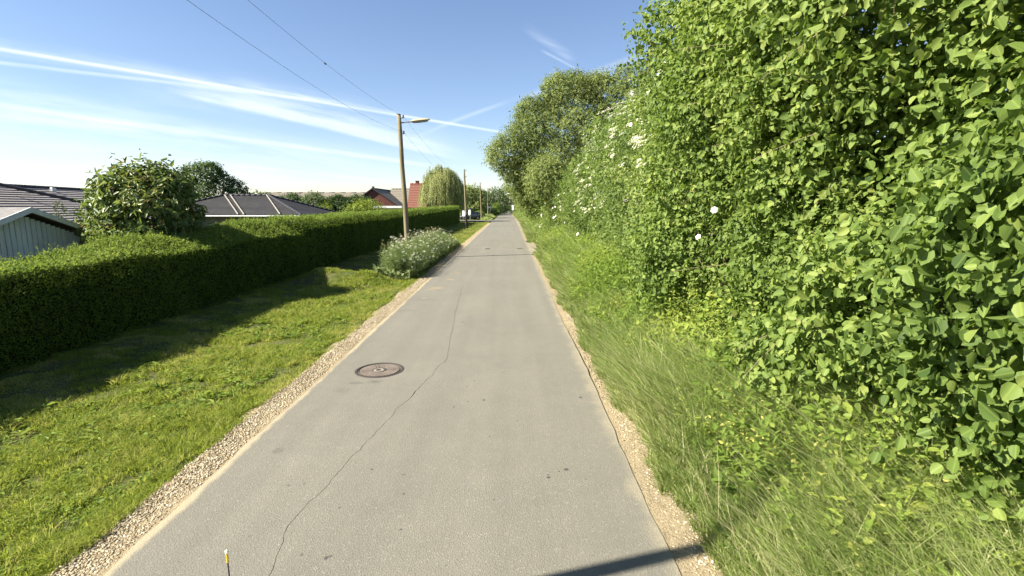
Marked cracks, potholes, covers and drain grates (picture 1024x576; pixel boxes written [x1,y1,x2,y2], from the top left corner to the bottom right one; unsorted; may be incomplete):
crack [269,284,464,576]
manhole cover [354,363,404,378]
